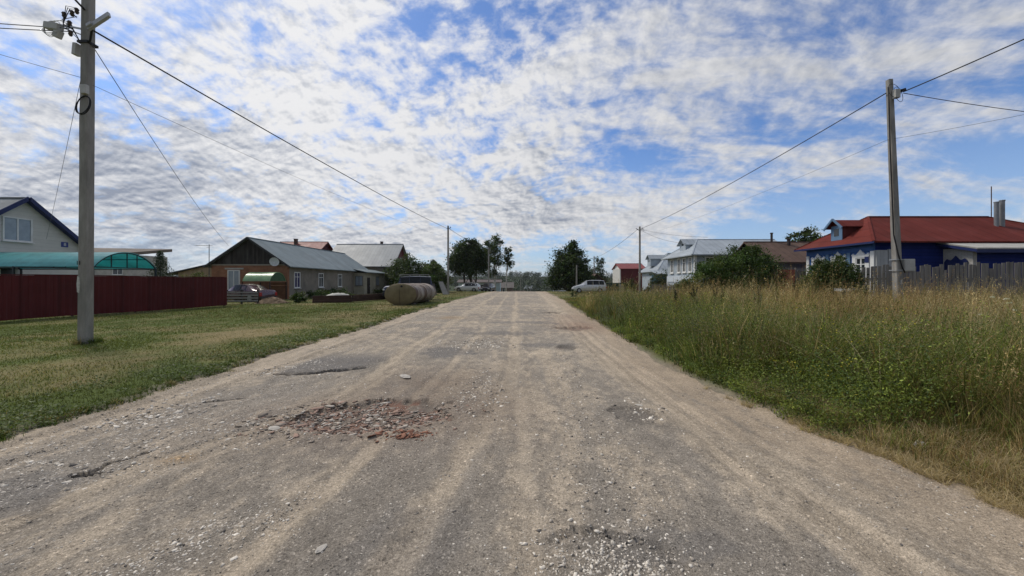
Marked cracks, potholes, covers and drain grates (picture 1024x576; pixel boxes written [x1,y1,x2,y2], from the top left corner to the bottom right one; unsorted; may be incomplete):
pothole [255,397,459,437]
crack [89,450,150,476]
pothole [532,525,704,576]
